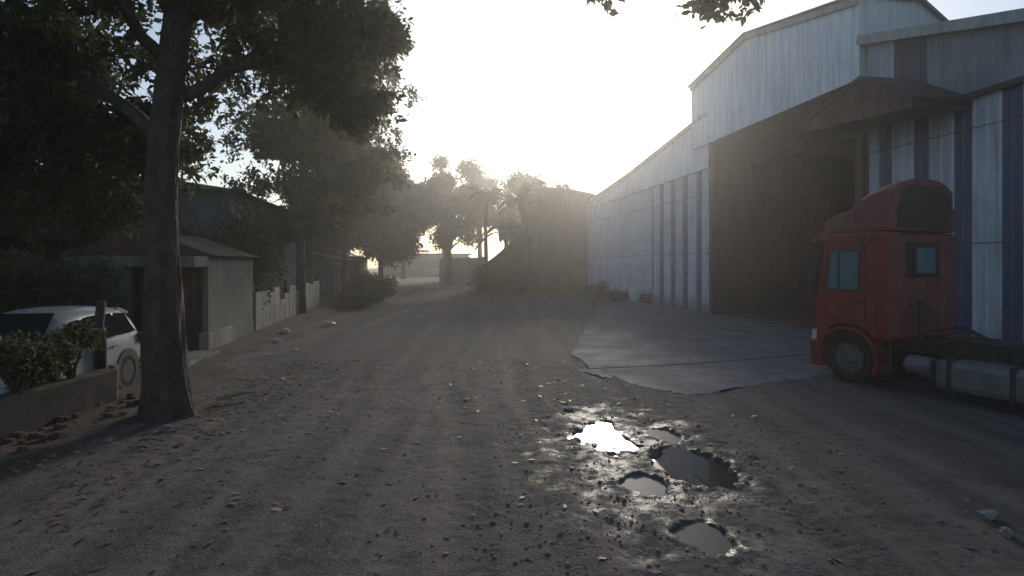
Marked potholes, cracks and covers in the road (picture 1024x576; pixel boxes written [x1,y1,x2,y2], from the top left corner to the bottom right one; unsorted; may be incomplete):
pothole [649,445,740,491]
pothole [566,418,645,457]
pothole [619,470,670,497]
pothole [647,426,684,445]
pothole [668,518,747,557]
